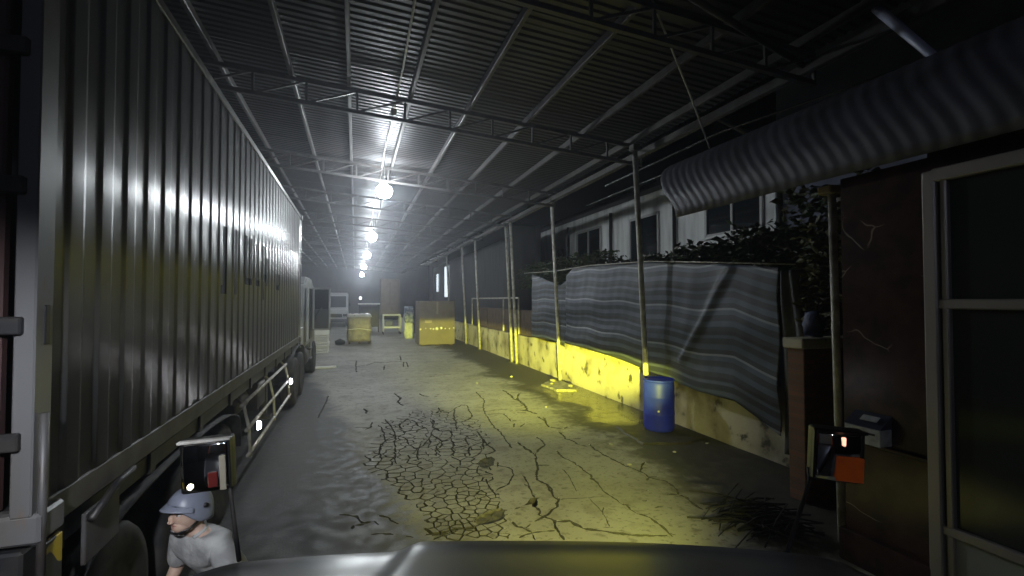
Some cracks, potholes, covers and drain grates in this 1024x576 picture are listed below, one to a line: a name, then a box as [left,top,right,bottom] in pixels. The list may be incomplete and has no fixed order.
crack [339,374,704,541]
